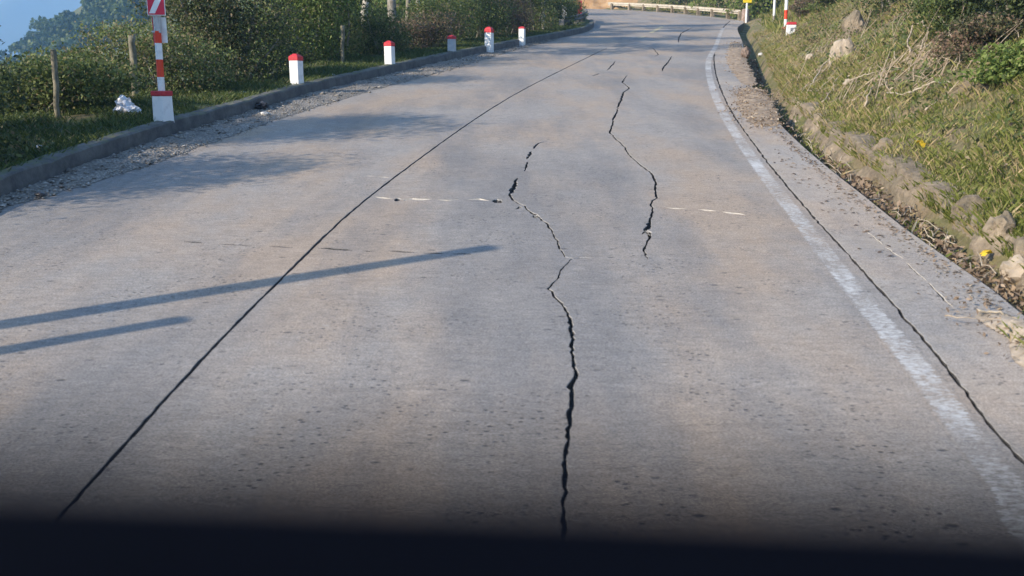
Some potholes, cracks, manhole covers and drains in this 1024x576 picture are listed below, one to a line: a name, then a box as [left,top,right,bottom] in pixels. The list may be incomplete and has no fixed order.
crack [508,141,587,457]
crack [593,28,744,259]
